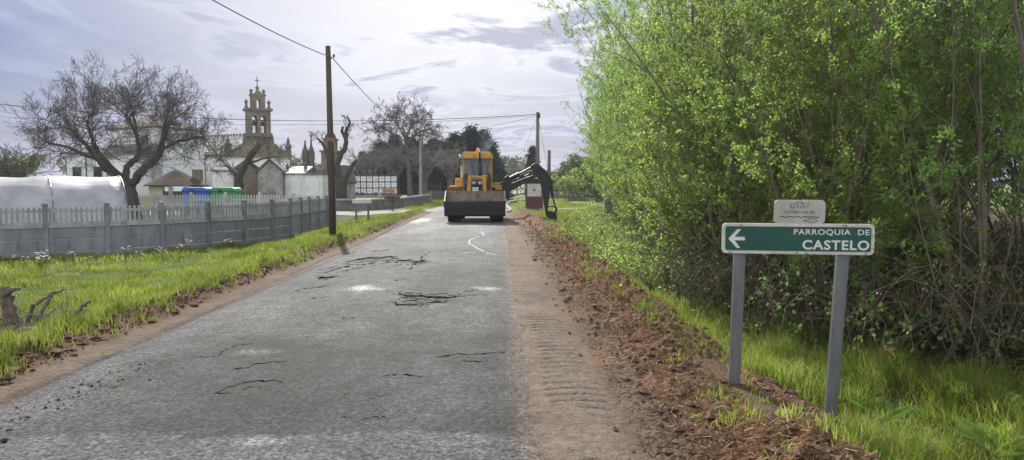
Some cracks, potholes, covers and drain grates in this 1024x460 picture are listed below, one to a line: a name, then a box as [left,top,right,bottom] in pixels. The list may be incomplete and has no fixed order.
crack [193,344,285,370]
crack [294,249,418,299]
crack [382,352,506,378]
